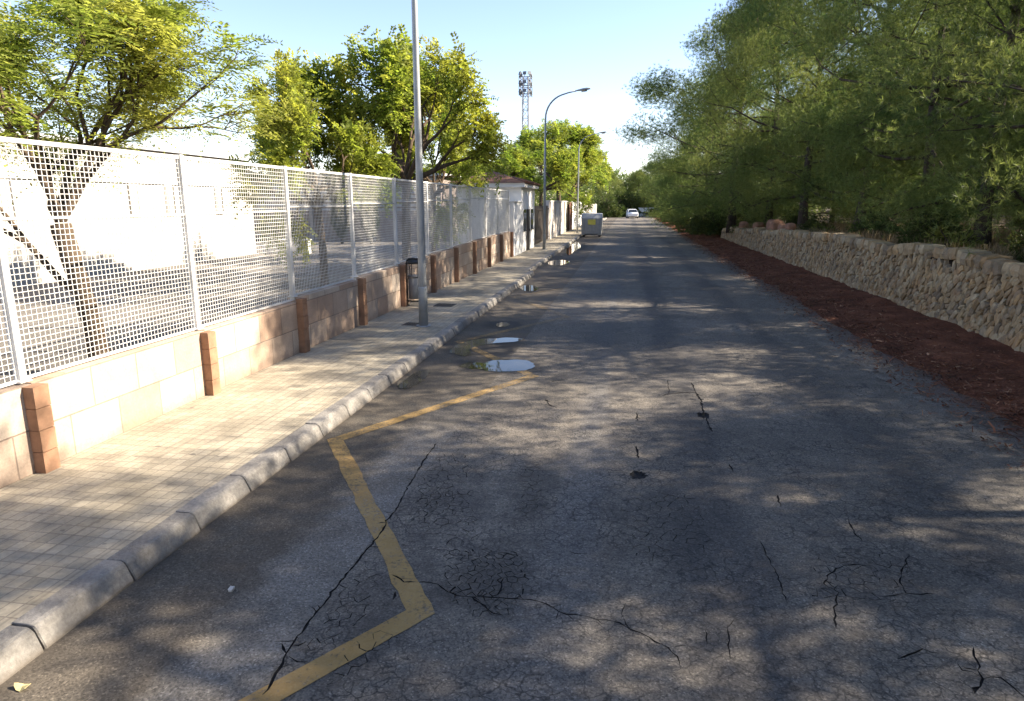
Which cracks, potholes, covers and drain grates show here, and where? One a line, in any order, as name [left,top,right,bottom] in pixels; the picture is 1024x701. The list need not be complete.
crack [812,522,934,627]
crack [957,628,1024,697]
crack [265,443,686,693]
pothole [630,470,648,479]
crack [662,380,716,432]
